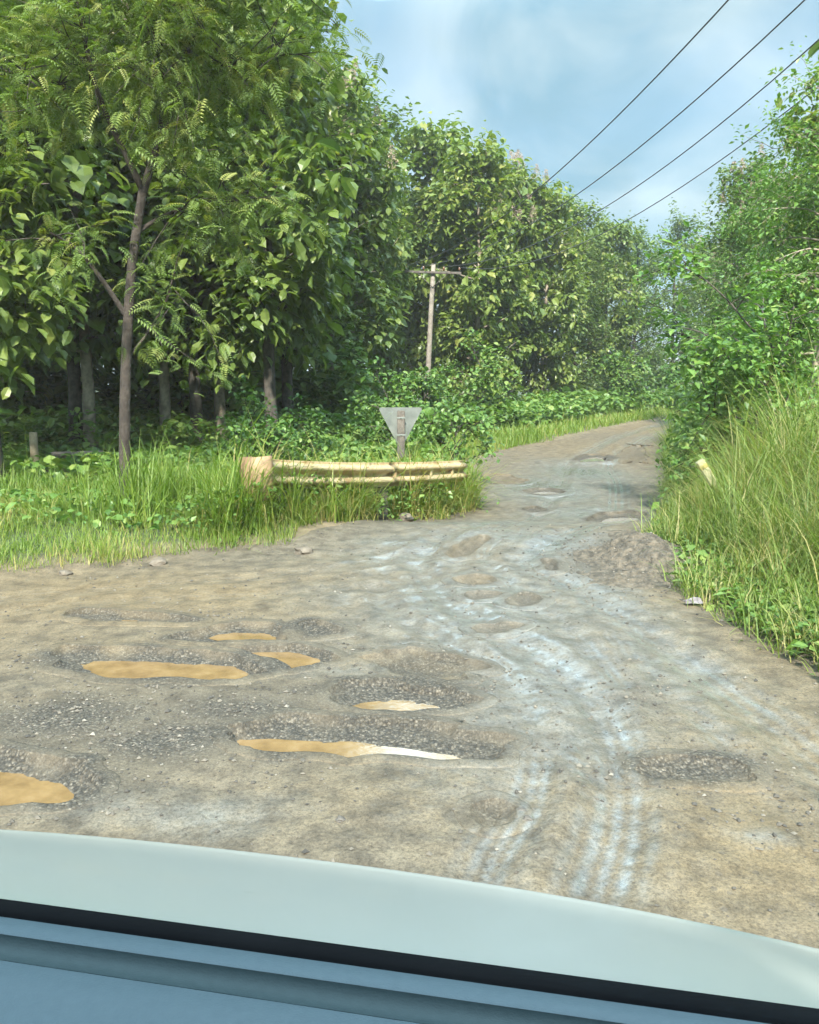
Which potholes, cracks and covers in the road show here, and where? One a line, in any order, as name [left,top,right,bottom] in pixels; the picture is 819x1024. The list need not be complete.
pothole [154,618,307,653]
pothole [209,707,533,769]
pothole [210,639,351,675]
pothole [512,486,577,498]
pothole [574,509,658,524]
pothole [492,590,555,611]
pothole [32,642,291,686]
pothole [440,571,509,588]
pothole [0,739,121,817]
pothole [562,452,633,465]
pothole [313,673,499,726]
pothole [617,748,775,793]
